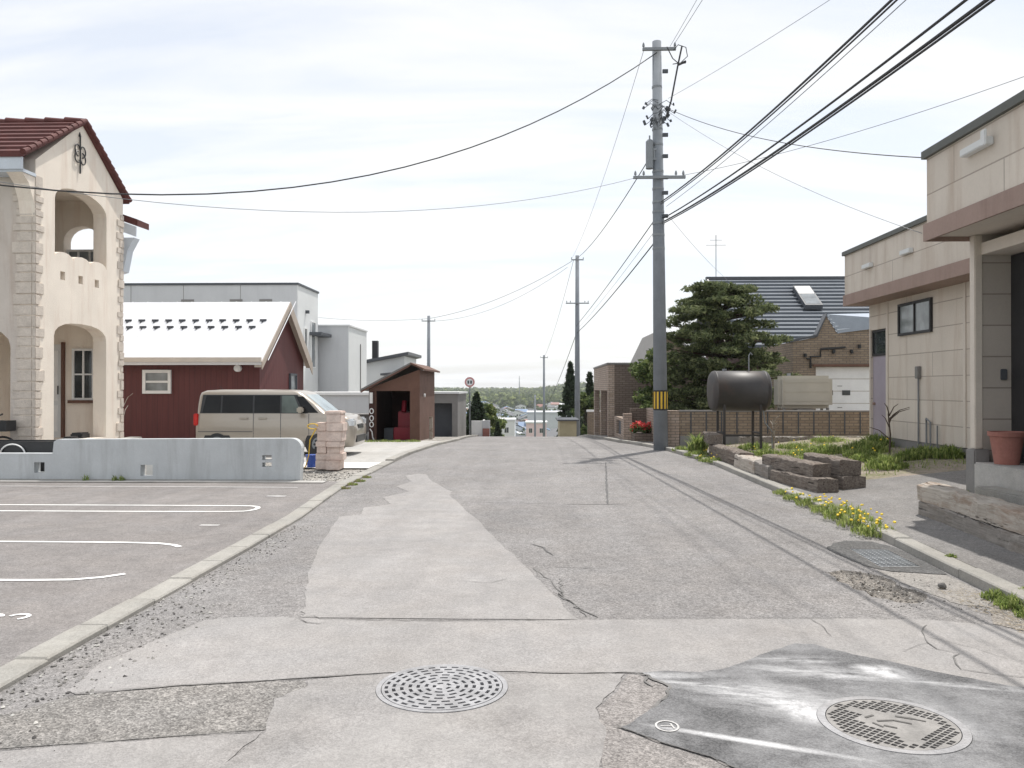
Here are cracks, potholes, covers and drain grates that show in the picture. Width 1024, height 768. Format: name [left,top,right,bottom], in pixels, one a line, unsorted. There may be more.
crack [297,544,598,623]
drain grate [847,548,923,568]
crack [904,624,1024,677]
manhole cover [376,664,508,713]
manhole cover [817,696,972,755]
pothole [826,570,927,603]
